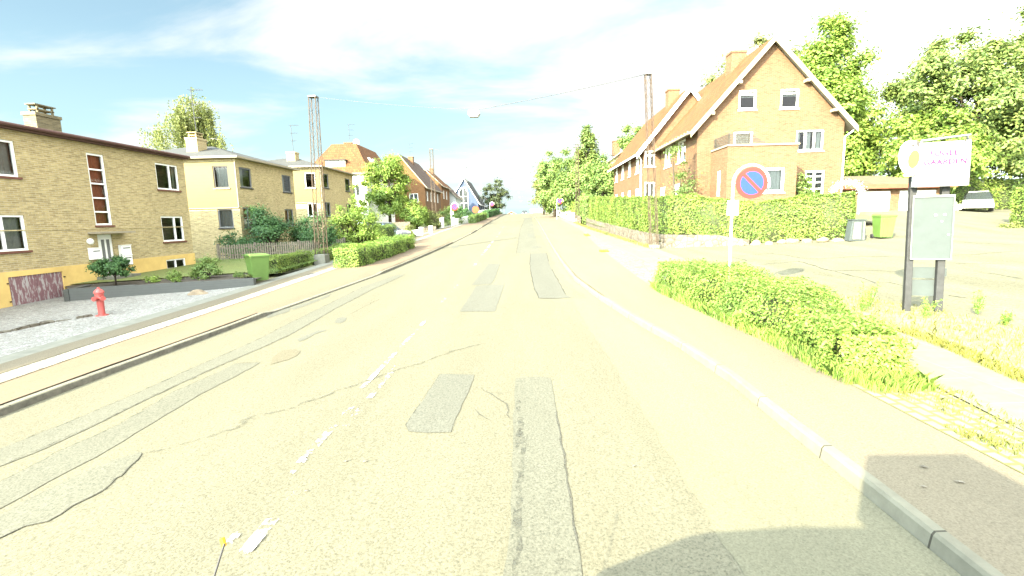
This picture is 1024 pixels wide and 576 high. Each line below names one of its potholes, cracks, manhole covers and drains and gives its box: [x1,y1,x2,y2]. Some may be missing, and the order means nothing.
crack [158,344,479,451]
